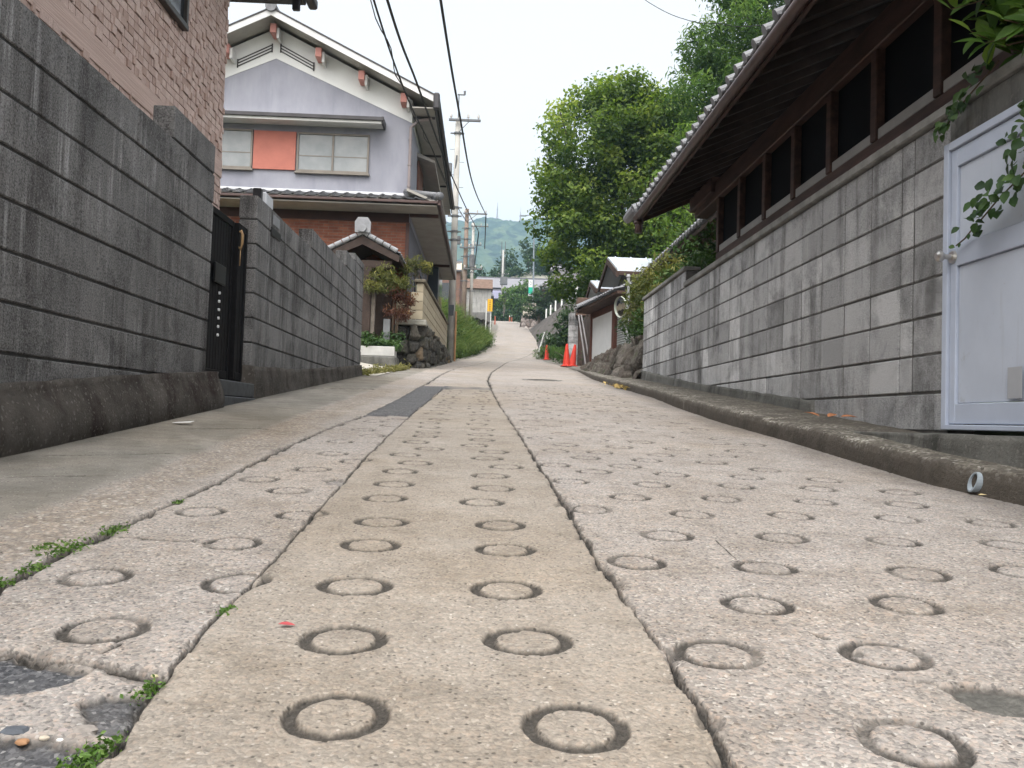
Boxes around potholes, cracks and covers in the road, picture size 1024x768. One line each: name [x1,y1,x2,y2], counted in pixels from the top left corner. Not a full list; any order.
pothole [0,658,92,695]
pothole [78,694,148,744]
pothole [941,684,1024,718]
